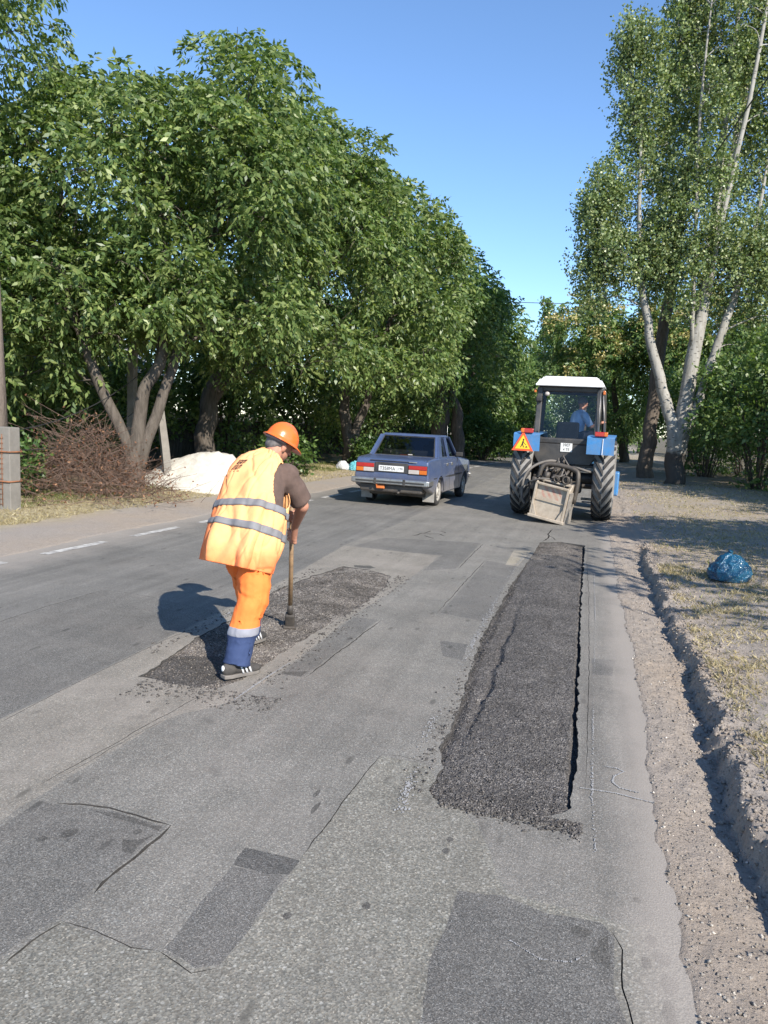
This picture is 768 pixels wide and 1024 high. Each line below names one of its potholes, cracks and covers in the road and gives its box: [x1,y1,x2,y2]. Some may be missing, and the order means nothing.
crack [304,755,422,854]
crack [4,921,216,974]
